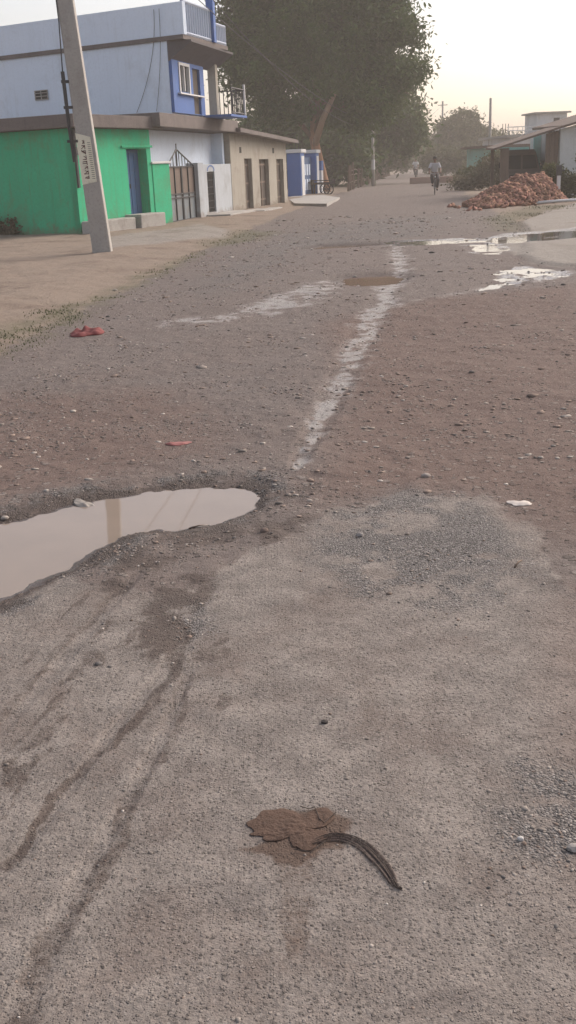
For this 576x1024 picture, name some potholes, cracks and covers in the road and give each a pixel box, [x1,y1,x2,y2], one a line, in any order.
pothole [0,478,274,612]
pothole [331,272,412,286]
